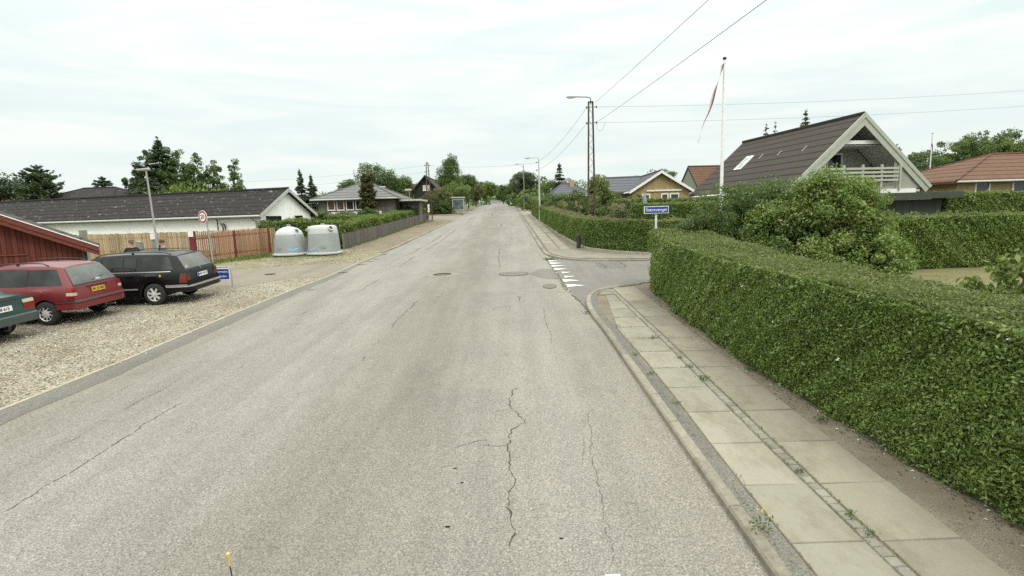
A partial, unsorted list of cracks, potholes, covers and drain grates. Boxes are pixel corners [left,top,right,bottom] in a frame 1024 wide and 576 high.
crack [4,359,221,512]
crack [457,389,525,549]
crack [582,419,614,566]
